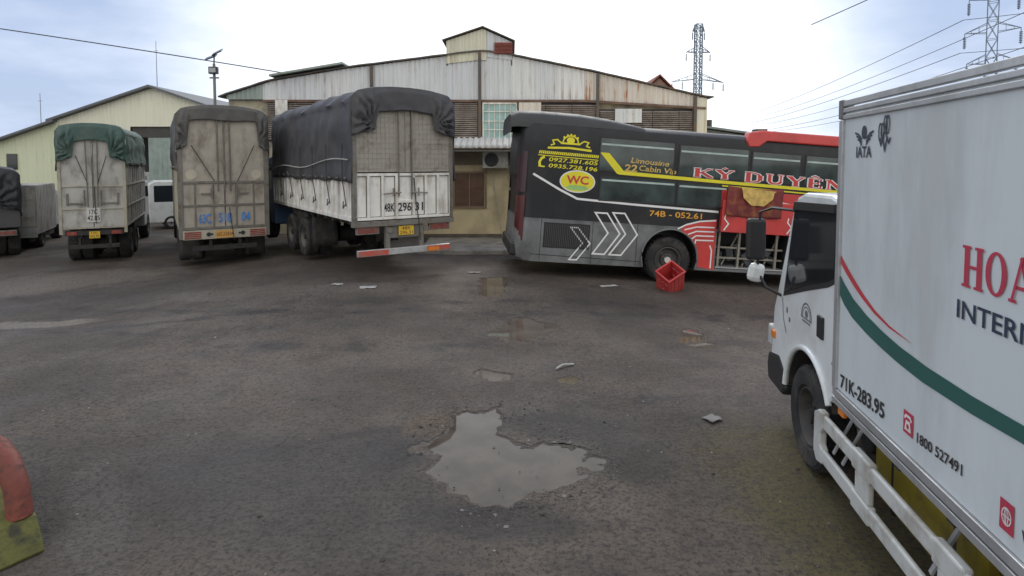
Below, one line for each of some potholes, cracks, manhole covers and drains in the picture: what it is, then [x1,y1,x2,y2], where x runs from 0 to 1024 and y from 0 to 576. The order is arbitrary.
pothole [473,368,516,383]
pothole [406,404,610,509]
